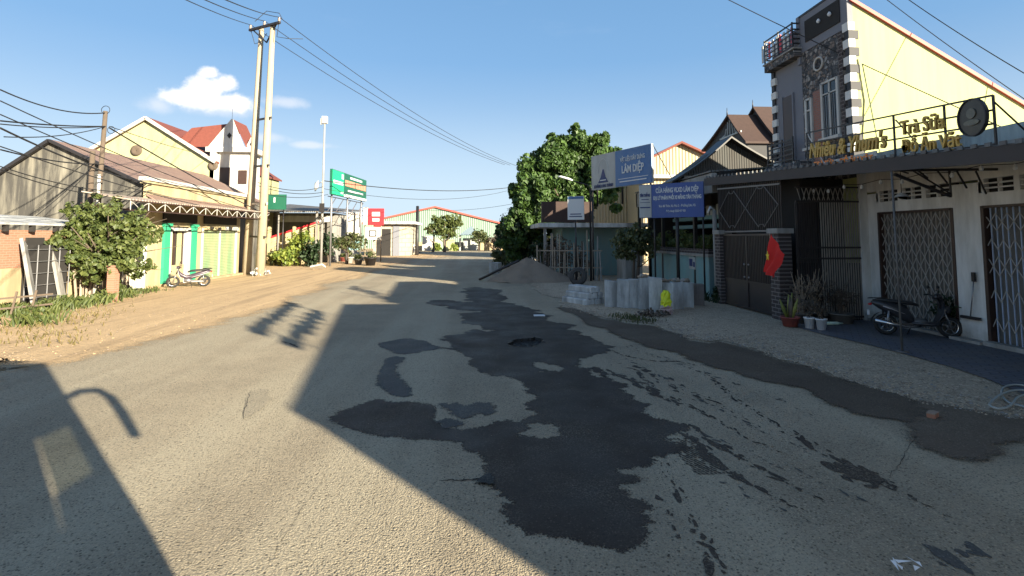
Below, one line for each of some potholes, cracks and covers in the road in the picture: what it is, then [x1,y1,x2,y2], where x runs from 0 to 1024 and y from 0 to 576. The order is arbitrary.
pothole [506,337,545,347]
